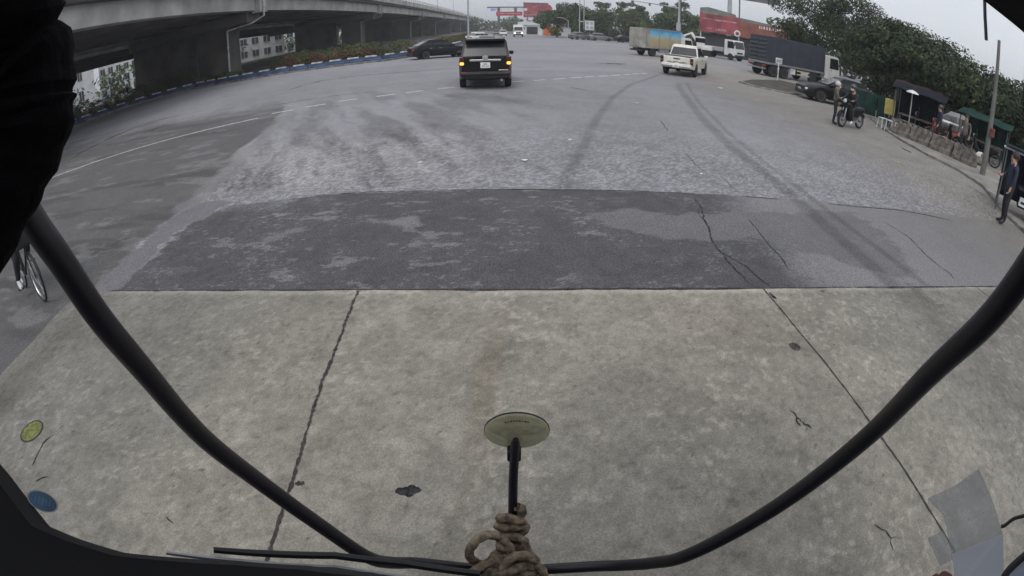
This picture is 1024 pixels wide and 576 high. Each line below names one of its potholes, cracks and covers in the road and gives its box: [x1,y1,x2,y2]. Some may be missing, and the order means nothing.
crack [695,199,788,286]
pothole [385,475,430,507]
